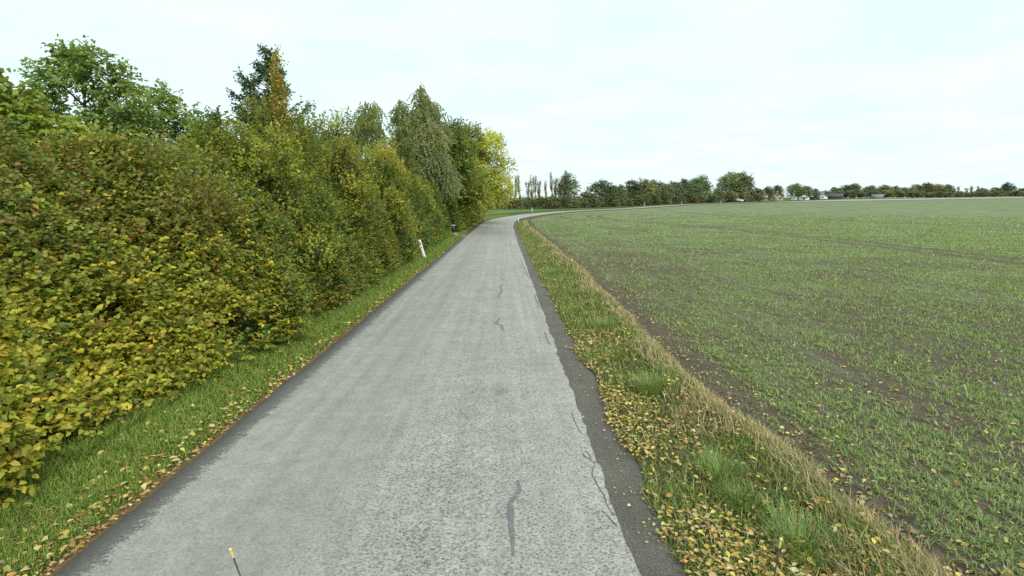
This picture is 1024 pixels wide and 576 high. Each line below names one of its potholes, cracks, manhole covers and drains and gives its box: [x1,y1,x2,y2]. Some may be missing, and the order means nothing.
crack [582,453,618,527]
